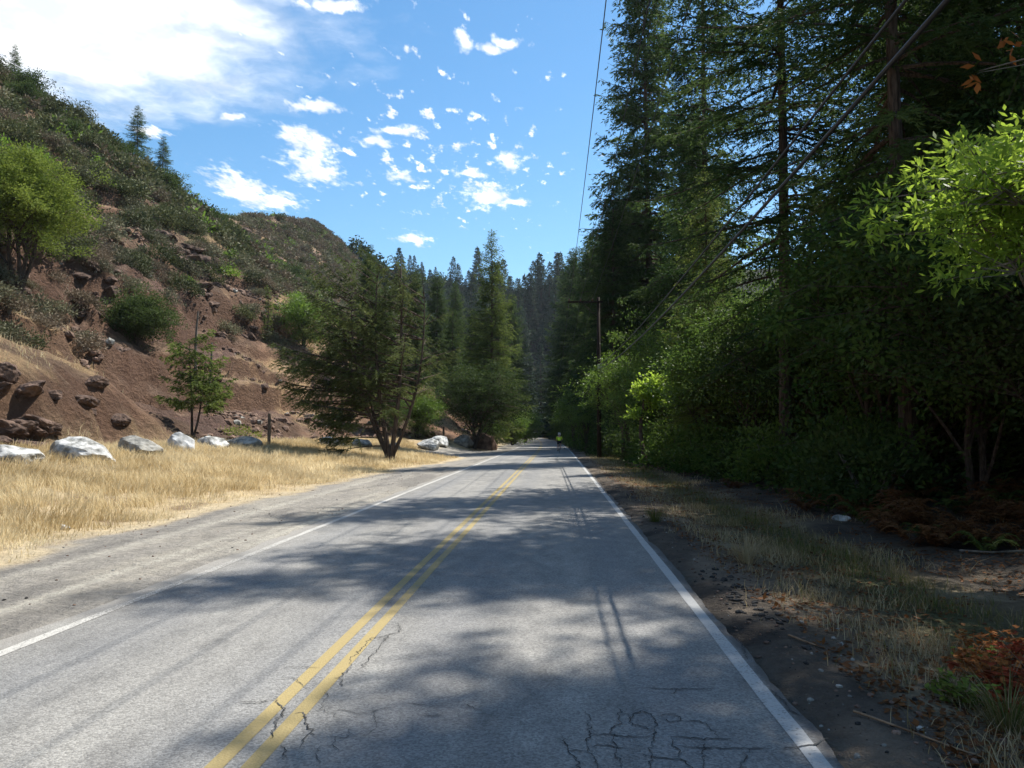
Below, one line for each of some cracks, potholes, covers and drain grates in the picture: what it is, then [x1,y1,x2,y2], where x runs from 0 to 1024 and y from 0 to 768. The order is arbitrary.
crack [240,693,445,764]
crack [563,705,763,768]
crack [339,623,400,686]
